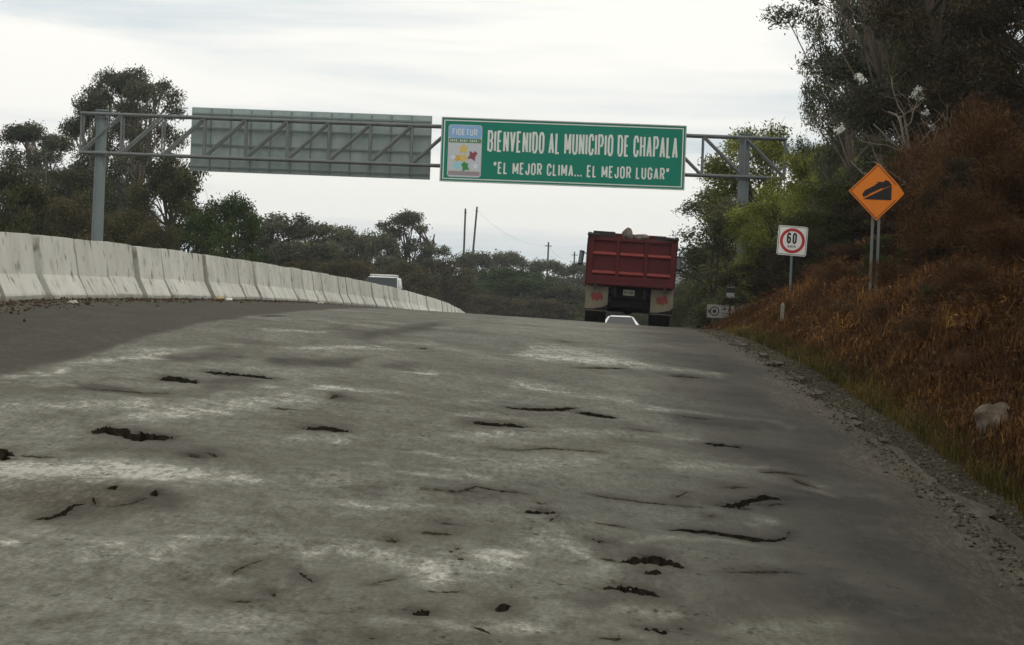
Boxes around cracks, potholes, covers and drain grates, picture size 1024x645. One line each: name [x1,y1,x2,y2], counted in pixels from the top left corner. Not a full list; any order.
pothole [91,426,173,442]
crack [507,407,651,432]
pothole [601,584,660,597]
crack [35,504,84,520]
crack [433,486,524,494]
crack [730,471,815,506]
pothole [160,376,200,384]
pothole [619,555,684,569]
pothole [0,449,15,461]
crack [668,529,790,542]
